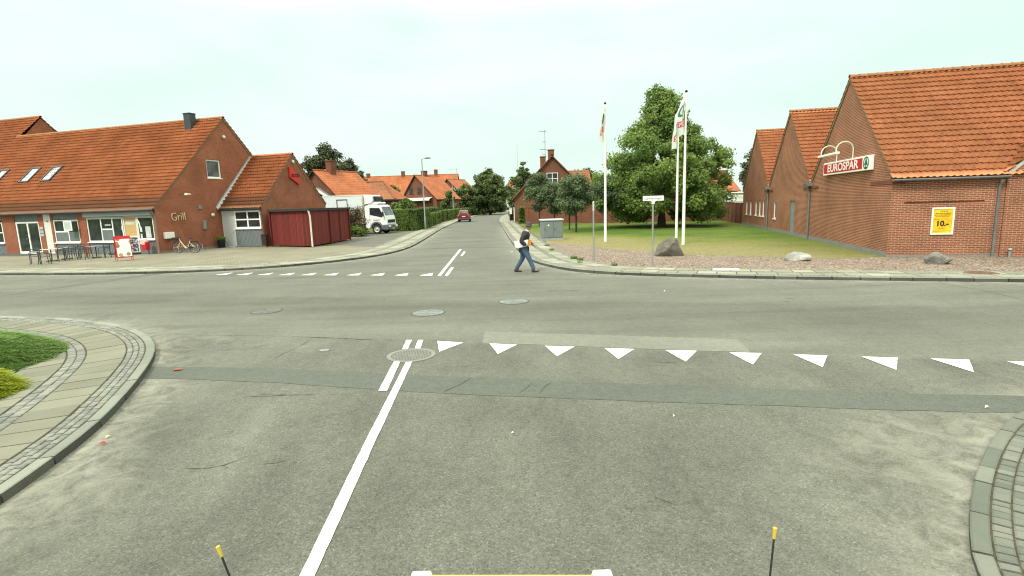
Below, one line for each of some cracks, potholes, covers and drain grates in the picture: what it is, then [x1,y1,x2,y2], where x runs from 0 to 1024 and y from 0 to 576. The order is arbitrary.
manhole cover [386,348,436,362]
